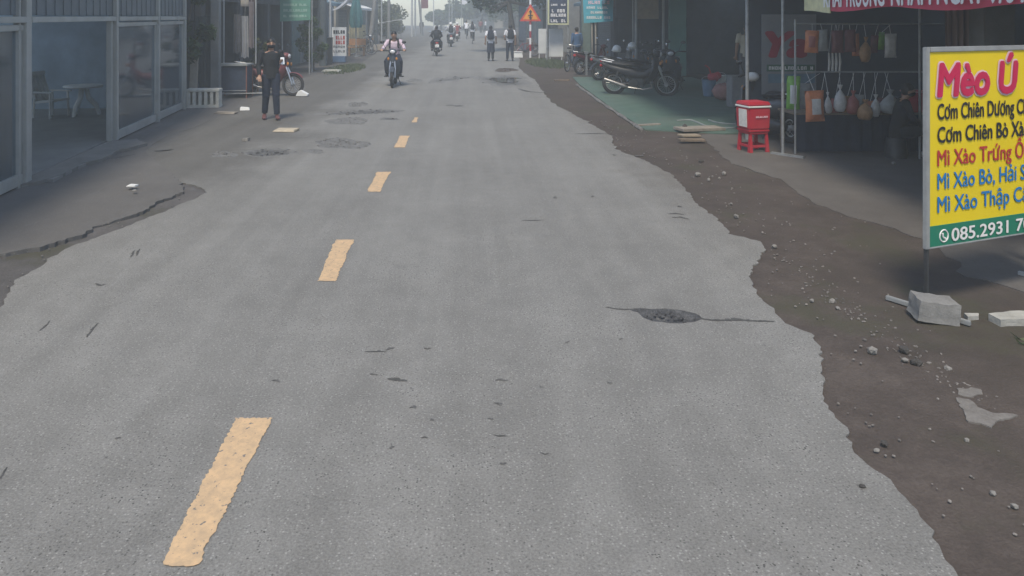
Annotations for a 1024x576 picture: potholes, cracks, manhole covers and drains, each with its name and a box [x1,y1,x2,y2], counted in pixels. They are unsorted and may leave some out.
pothole [473,75,532,88]
pothole [315,137,371,149]
pothole [240,148,297,157]
pothole [428,76,474,84]
pothole [629,308,701,323]
pothole [324,117,367,125]
